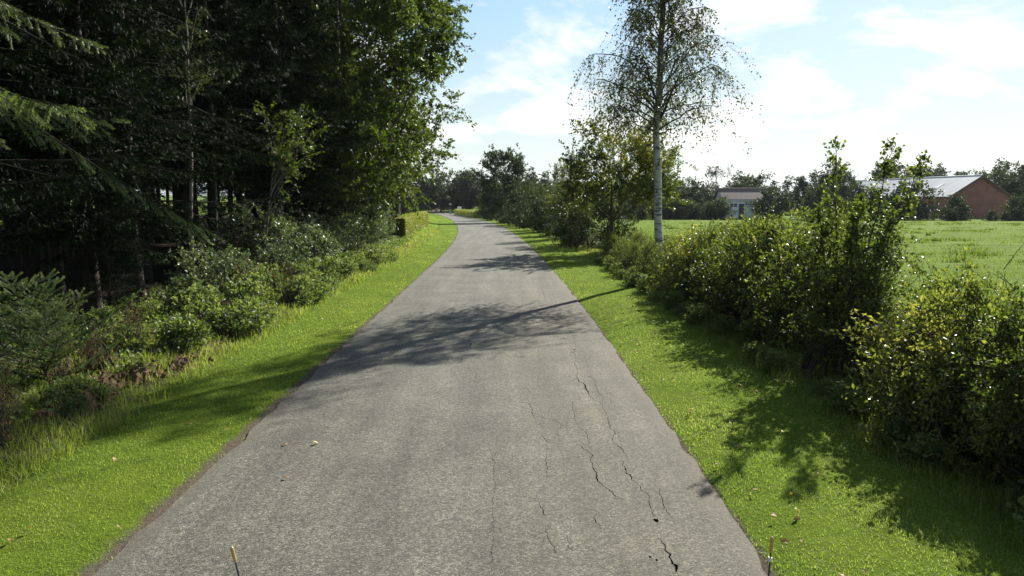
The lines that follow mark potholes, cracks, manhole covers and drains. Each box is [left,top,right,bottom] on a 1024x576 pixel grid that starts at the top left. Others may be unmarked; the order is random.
crack [658,538,679,575]
crack [542,323,672,519]
